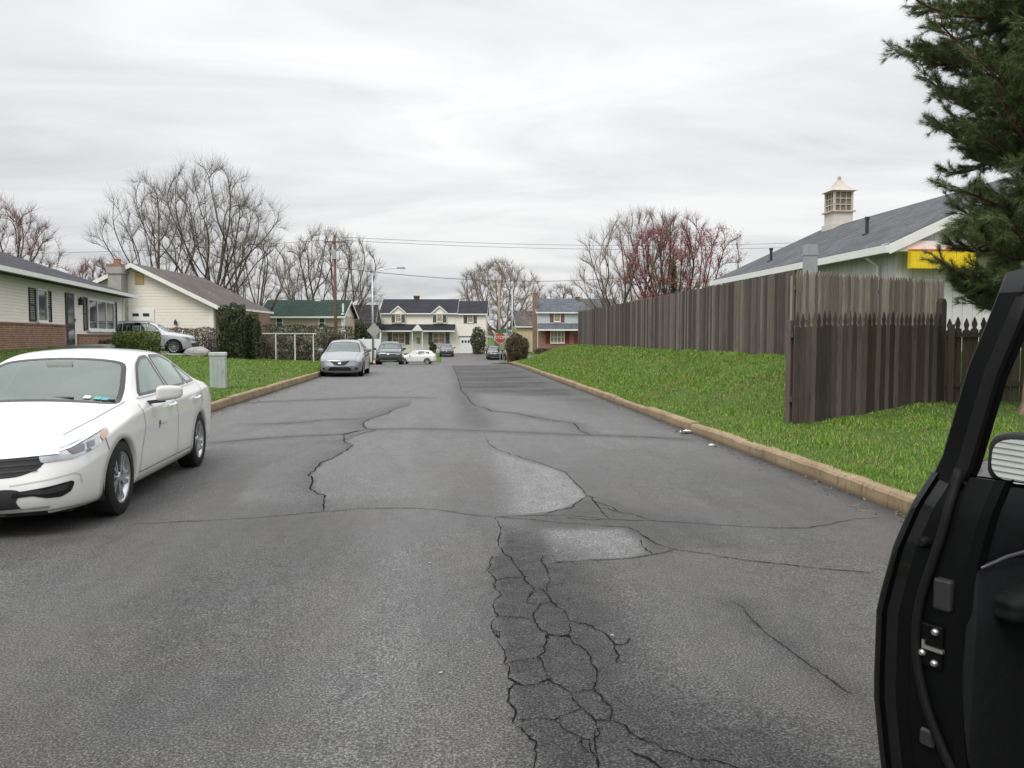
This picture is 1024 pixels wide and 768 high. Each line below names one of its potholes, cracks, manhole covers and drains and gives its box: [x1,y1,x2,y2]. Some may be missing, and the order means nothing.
crack [486,518,738,768]
crack [214,397,675,510]
crack [139,437,878,573]
crack [732,601,852,694]
